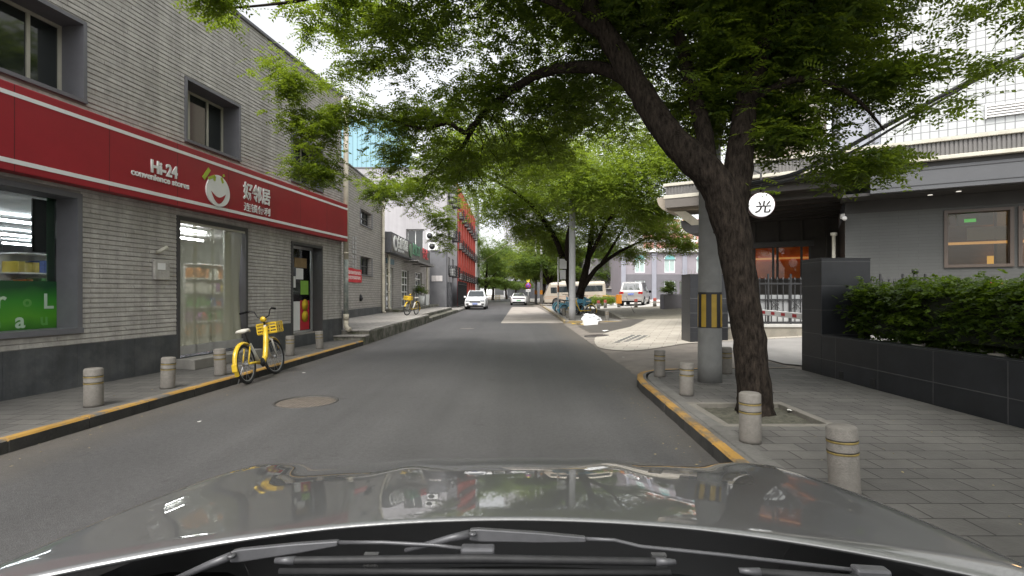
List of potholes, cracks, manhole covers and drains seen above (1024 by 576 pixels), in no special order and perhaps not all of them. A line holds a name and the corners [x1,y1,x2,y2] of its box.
manhole cover [272,395,339,409]
drain grate [612,335,649,343]
